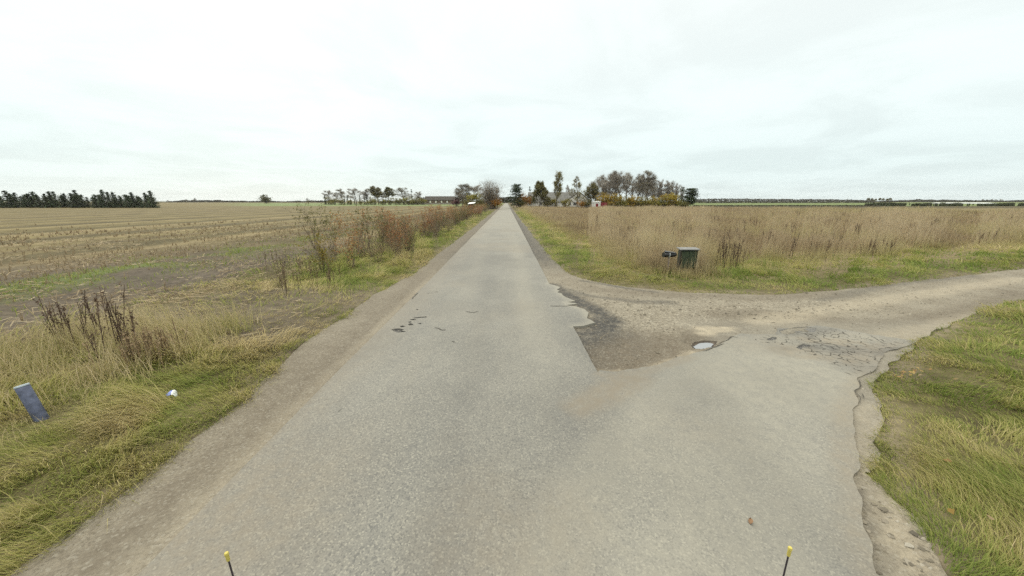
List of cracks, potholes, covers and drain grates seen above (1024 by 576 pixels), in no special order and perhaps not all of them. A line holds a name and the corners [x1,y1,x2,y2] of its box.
pothole [691,341,717,349]
crack [764,328,898,401]
